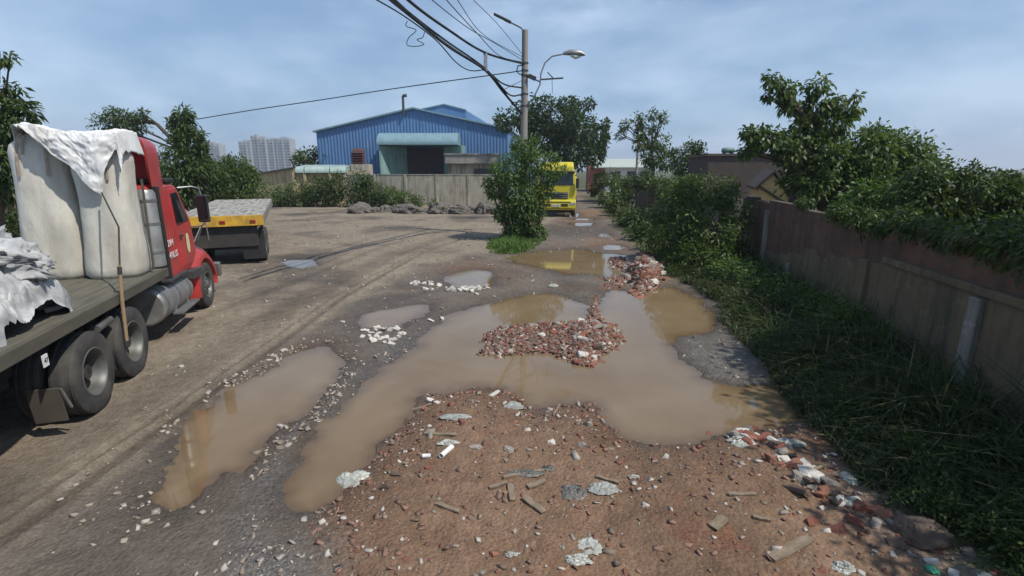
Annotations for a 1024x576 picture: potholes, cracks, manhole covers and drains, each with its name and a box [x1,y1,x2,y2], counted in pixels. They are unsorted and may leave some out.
pothole [507,249,630,277]
pothole [281,258,318,268]
pothole [444,269,496,288]
pothole [145,345,348,514]
pothole [277,287,806,513]
